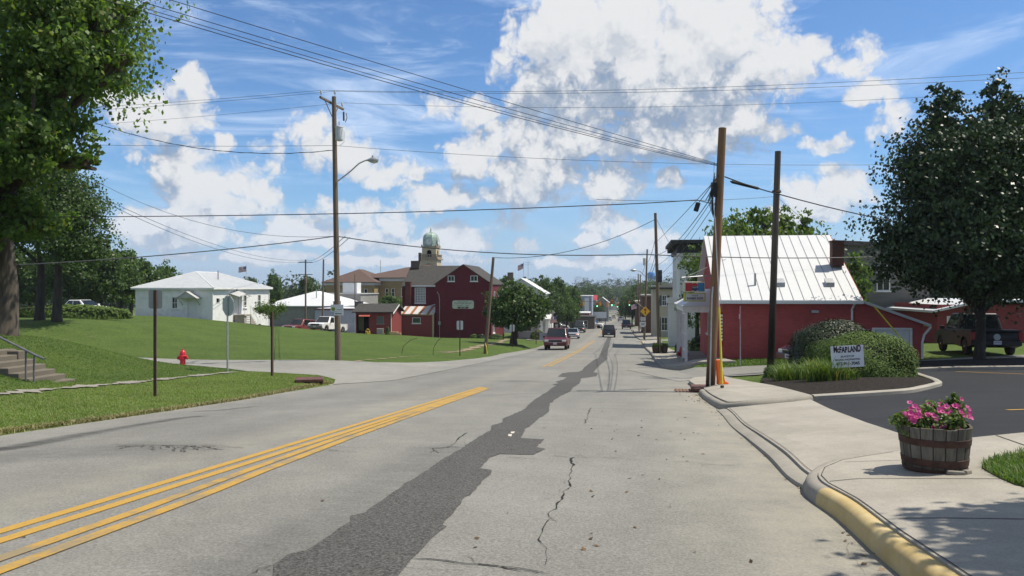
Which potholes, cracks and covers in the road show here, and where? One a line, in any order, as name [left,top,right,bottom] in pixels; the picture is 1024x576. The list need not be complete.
crack [406,457,575,573]
crack [116,444,243,452]
